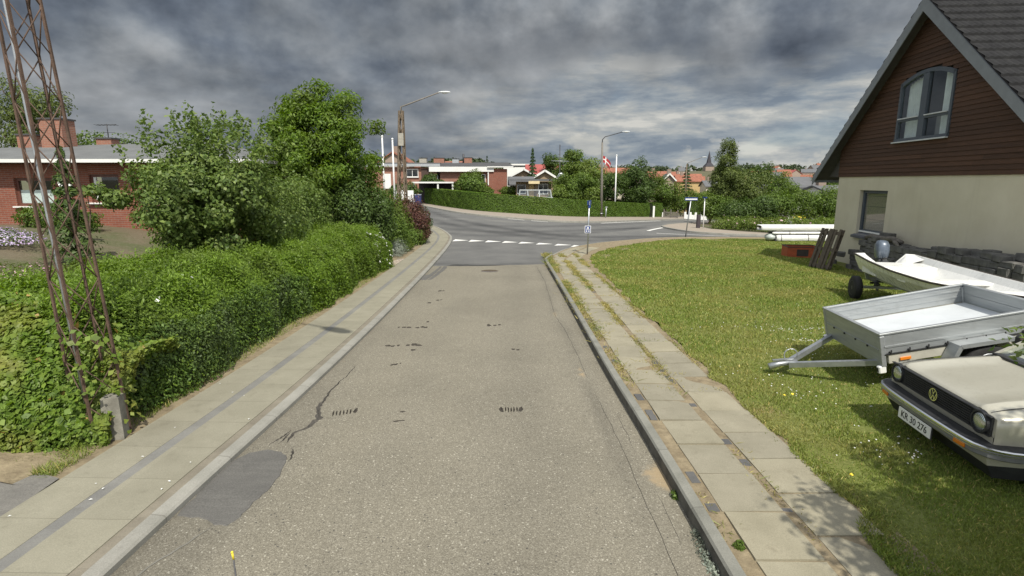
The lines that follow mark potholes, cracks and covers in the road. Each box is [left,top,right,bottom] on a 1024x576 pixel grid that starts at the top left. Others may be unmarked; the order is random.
crack [269,365,356,461]
